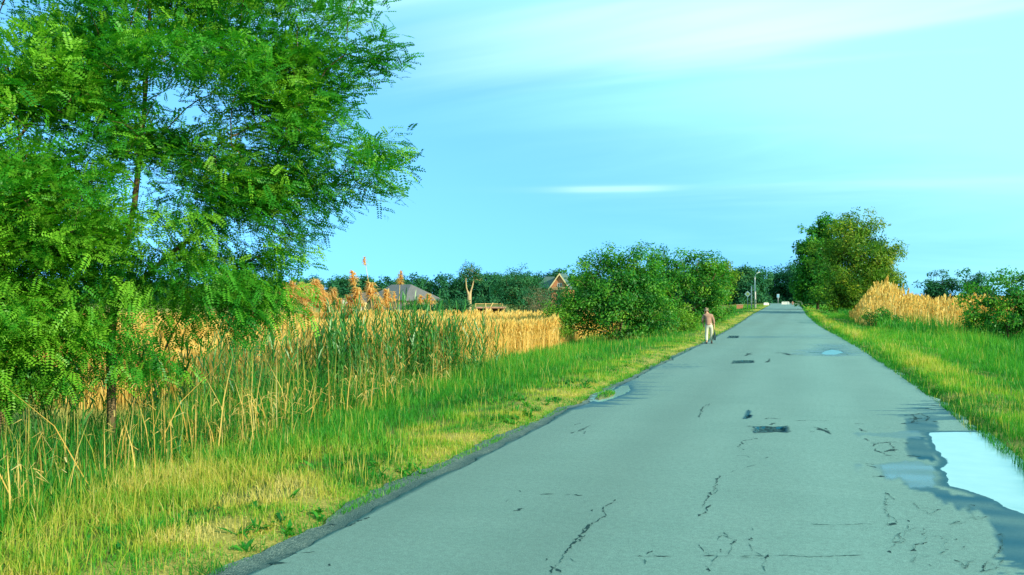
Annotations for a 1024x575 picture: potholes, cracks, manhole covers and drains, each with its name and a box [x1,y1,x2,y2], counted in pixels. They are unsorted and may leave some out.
crack [698,418,778,516]
crack [855,423,1005,572]
crack [699,527,857,571]
crack [901,405,937,424]
crack [514,490,616,573]
